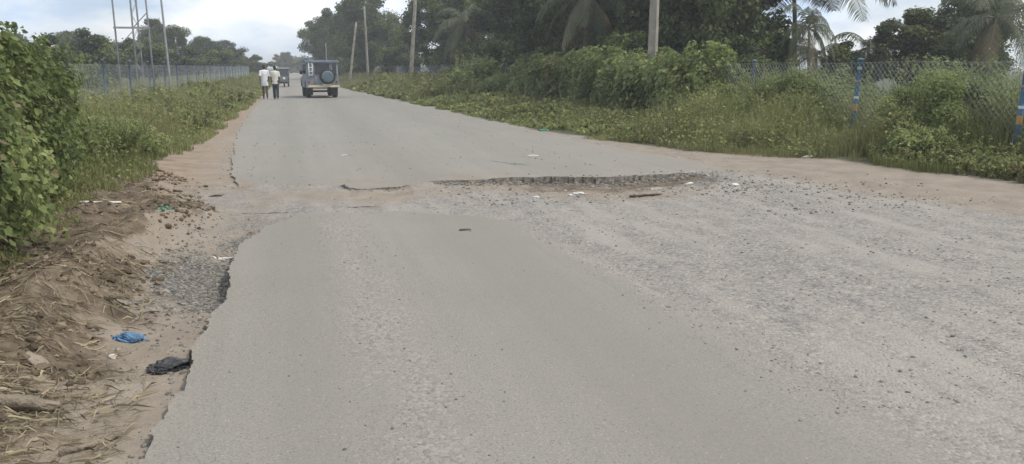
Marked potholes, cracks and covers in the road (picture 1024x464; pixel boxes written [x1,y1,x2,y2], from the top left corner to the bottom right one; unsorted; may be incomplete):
pothole [426,173,723,202]
pothole [144,230,261,320]
